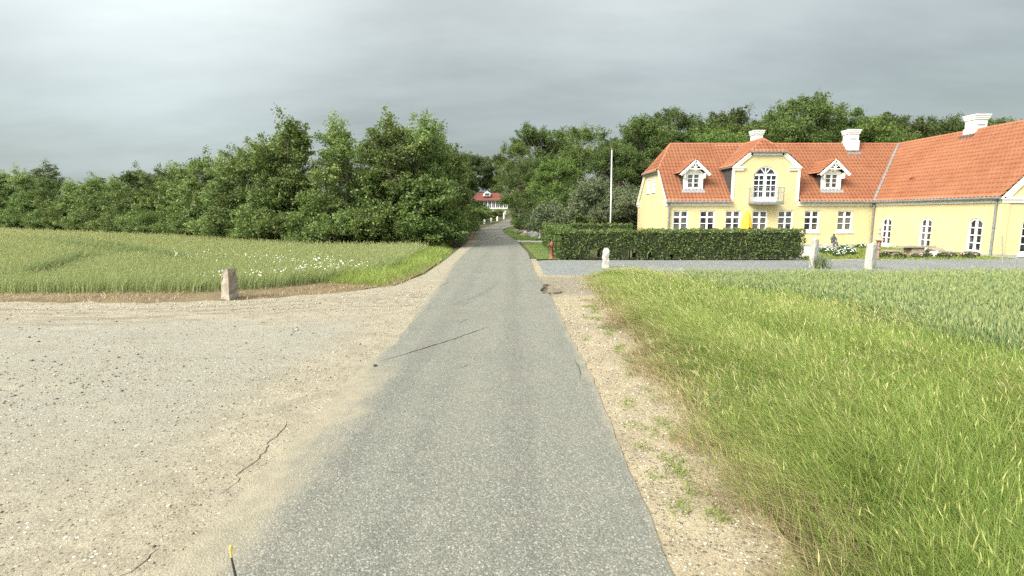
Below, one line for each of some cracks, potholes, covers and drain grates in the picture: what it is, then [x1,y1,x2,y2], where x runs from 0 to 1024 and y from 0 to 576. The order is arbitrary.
crack [121,549,158,576]
pothole [541,284,567,295]
crack [381,300,481,361]
crack [222,421,288,494]
